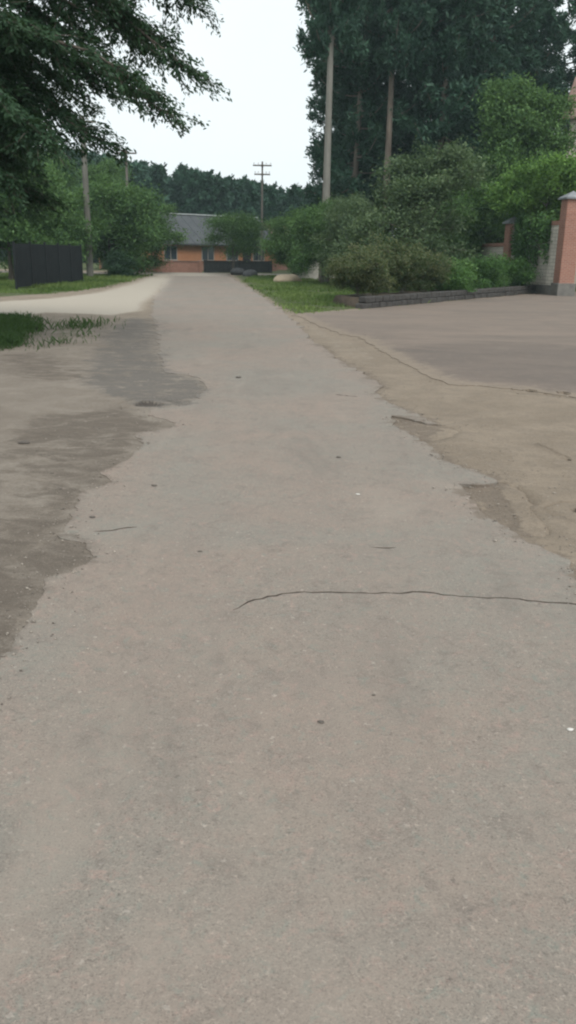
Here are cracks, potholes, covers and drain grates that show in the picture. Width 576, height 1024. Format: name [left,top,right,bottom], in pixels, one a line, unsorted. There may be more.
crack [234,591,576,610]
crack [534,443,573,461]
pothole [391,418,459,441]
pothole [118,399,178,410]
pothole [462,483,550,537]
